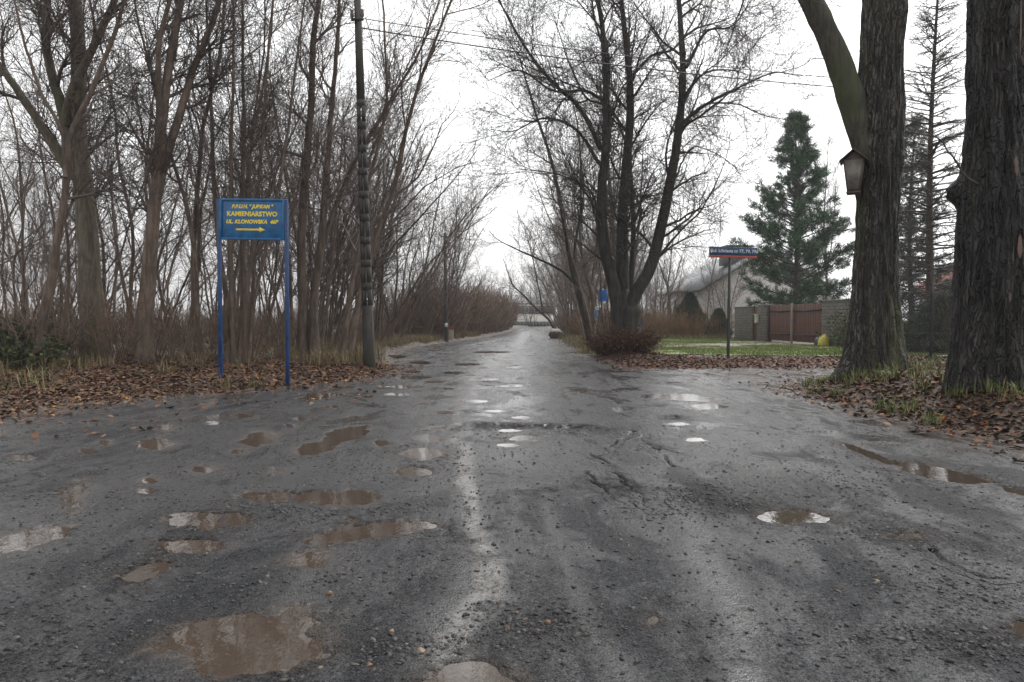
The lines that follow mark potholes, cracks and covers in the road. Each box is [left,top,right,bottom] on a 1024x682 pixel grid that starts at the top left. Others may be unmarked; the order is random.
pothole [986,484,1024,499]
pothole [131,533,251,561]
pothole [122,435,190,453]
pothole [0,520,107,559]
pothole [226,428,292,449]
pothole [873,458,1015,488]
pothole [278,424,384,459]
pothole [215,485,407,512]
pothole [828,440,900,465]
pothole [381,444,461,463]
